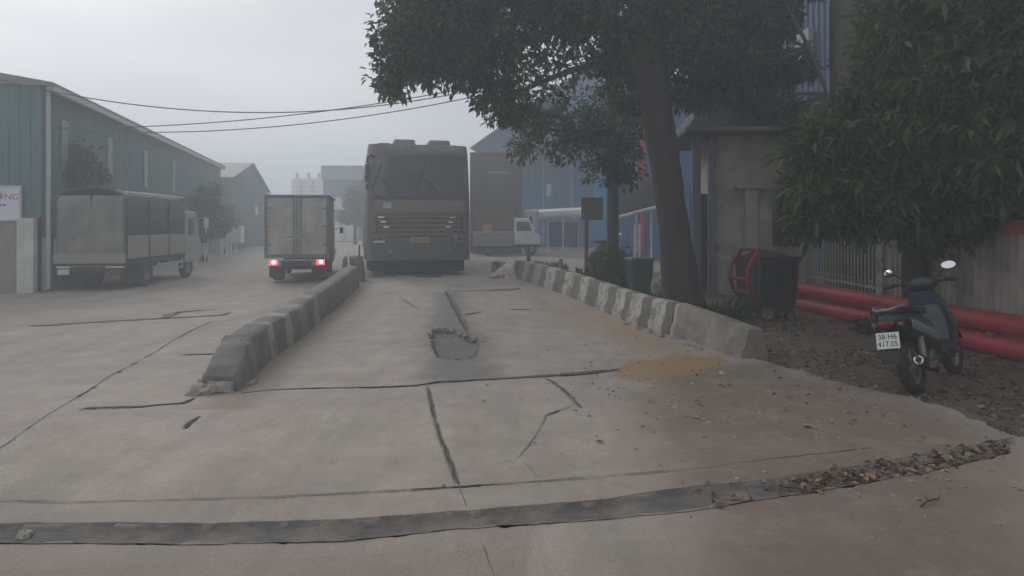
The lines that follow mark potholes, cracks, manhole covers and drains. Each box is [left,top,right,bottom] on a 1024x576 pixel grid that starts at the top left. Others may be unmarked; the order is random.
crack [0,369,871,507]
crack [0,309,230,448]
pothole [424,327,486,361]
